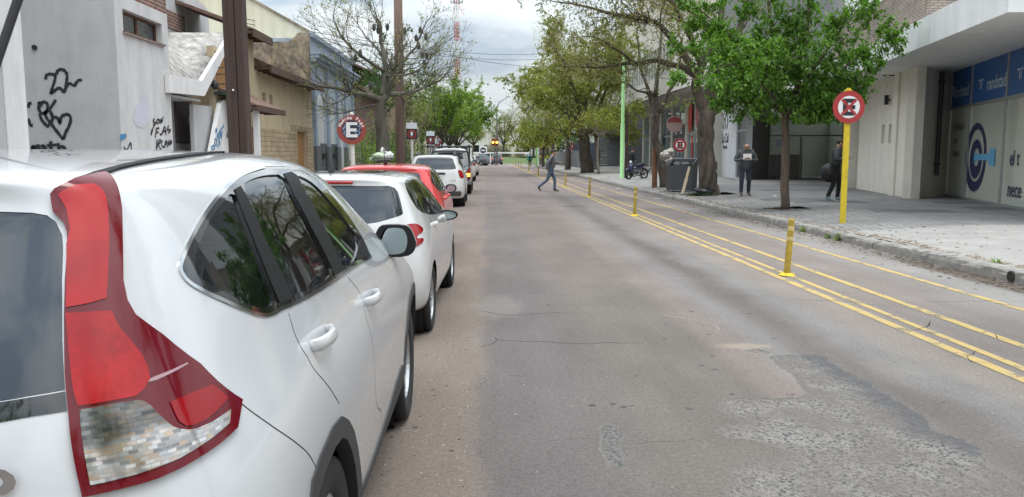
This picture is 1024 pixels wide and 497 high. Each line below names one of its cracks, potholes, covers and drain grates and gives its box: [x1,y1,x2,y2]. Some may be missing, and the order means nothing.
crack [482,337,647,347]
